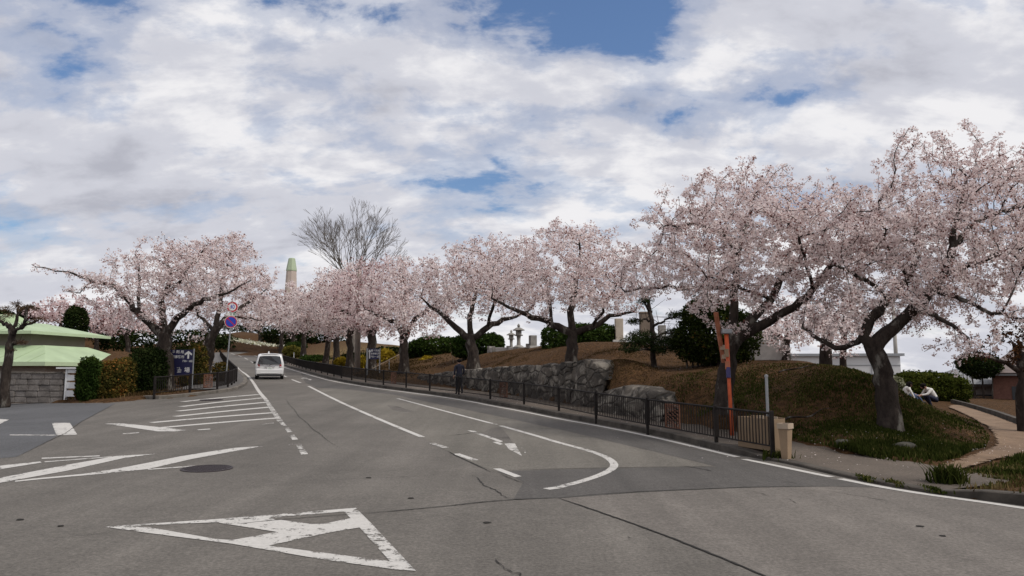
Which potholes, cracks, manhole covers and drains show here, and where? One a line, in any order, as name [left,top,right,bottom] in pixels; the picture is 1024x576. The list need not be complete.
crack [238,475,553,524]
manhole cover [180,465,233,473]
